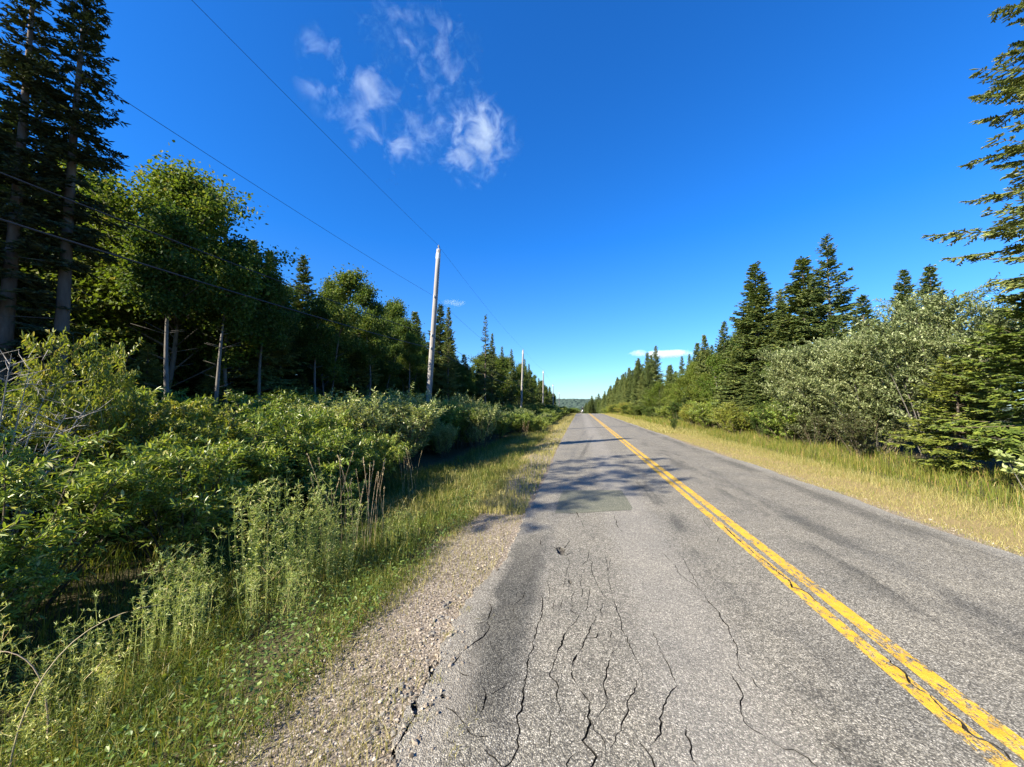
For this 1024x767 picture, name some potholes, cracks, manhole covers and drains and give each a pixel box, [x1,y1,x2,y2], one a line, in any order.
crack [703,519,816,601]
crack [665,555,846,767]
crack [889,659,1012,761]
crack [391,512,698,767]
